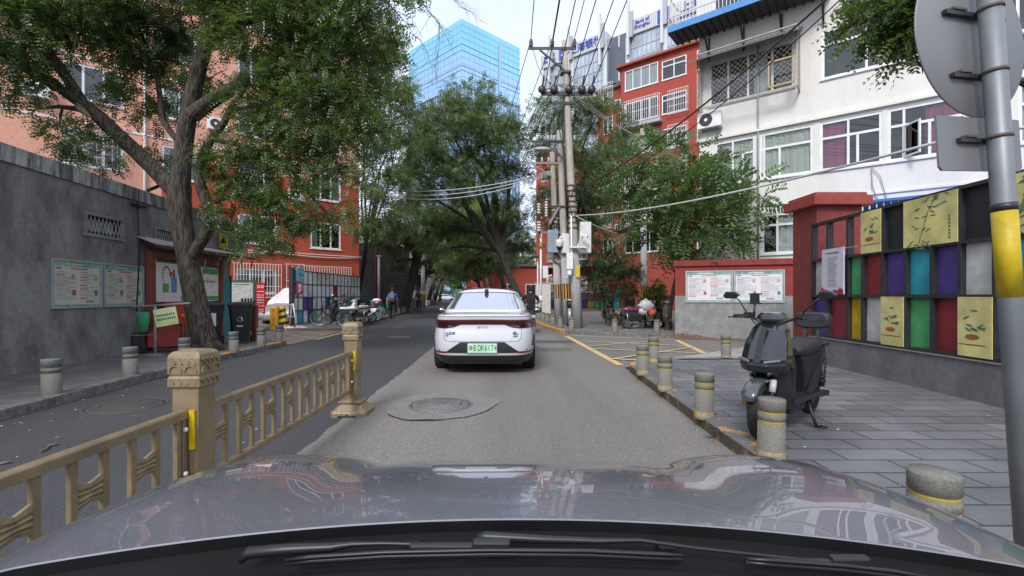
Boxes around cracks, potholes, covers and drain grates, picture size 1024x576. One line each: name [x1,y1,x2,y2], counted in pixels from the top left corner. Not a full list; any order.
manhole cover [385,393,500,420]
manhole cover [79,398,169,415]
